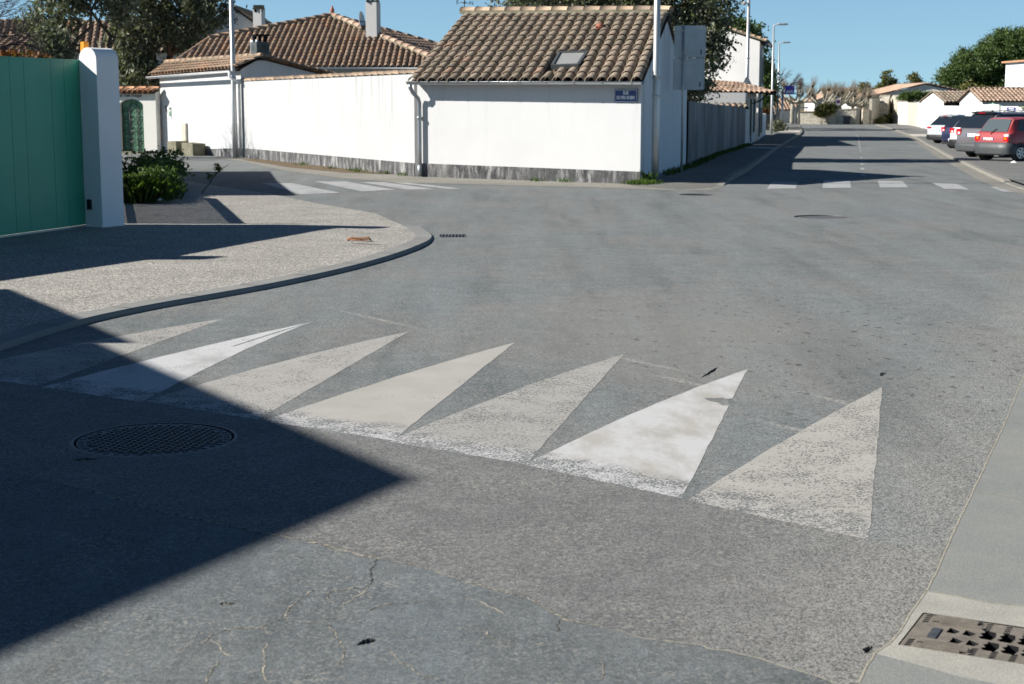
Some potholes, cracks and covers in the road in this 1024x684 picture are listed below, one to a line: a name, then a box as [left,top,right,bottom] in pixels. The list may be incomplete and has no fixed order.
manhole cover [70,422,238,457]
drain grate [898,613,1024,664]
crack [85,489,834,684]
